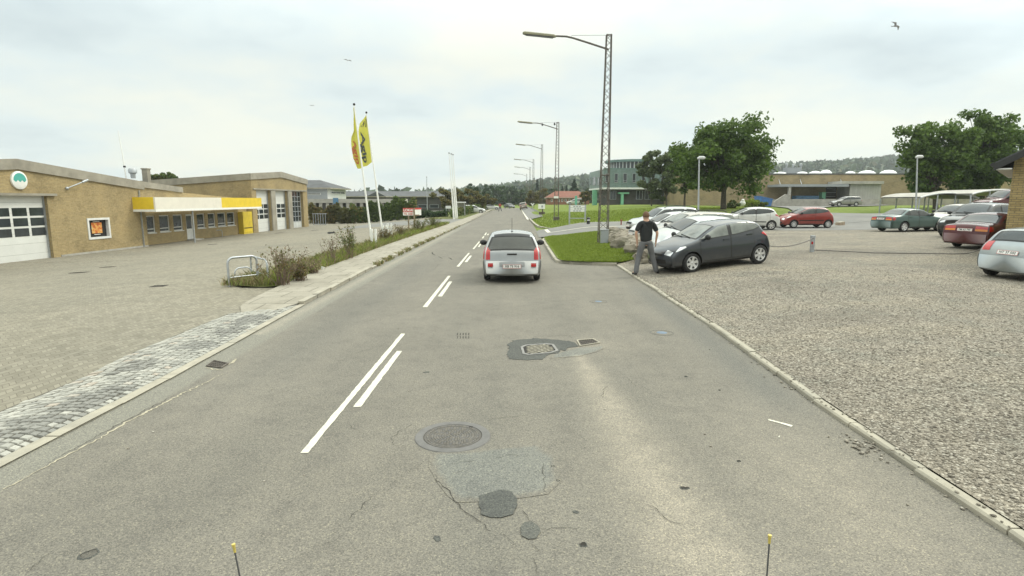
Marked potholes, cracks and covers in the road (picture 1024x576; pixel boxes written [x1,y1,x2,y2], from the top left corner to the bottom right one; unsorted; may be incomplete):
manhole cover [521,343,559,355]
manhole cover [414,421,491,453]
drain grate [206,360,229,368]
crack [50,394,176,462]
crack [325,461,515,544]
drain grate [576,338,601,346]
